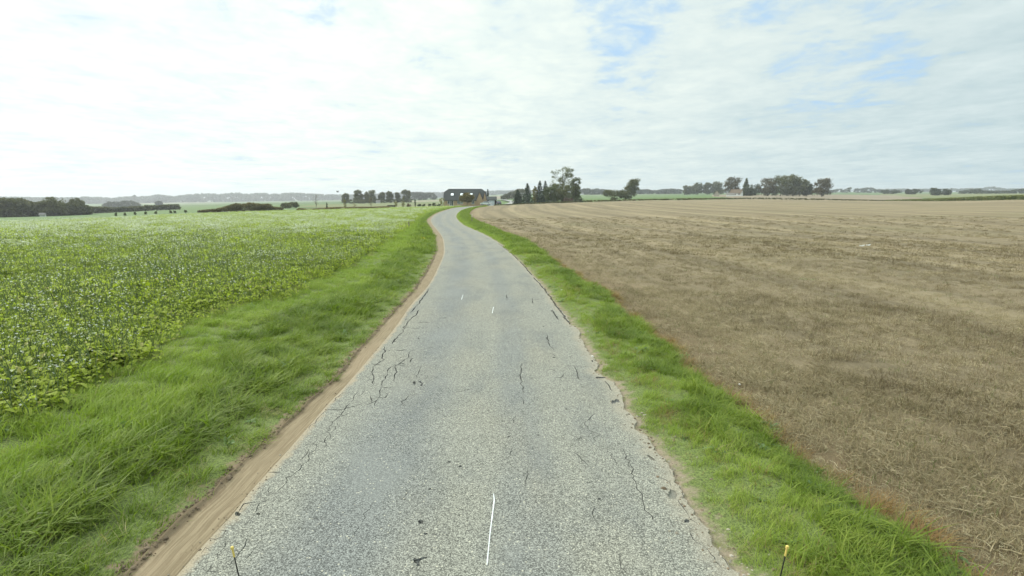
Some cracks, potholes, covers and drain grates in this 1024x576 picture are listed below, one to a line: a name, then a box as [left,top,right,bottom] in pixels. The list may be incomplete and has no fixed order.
crack [623,424,730,568]
crack [201,289,431,574]
crack [498,243,667,543]
